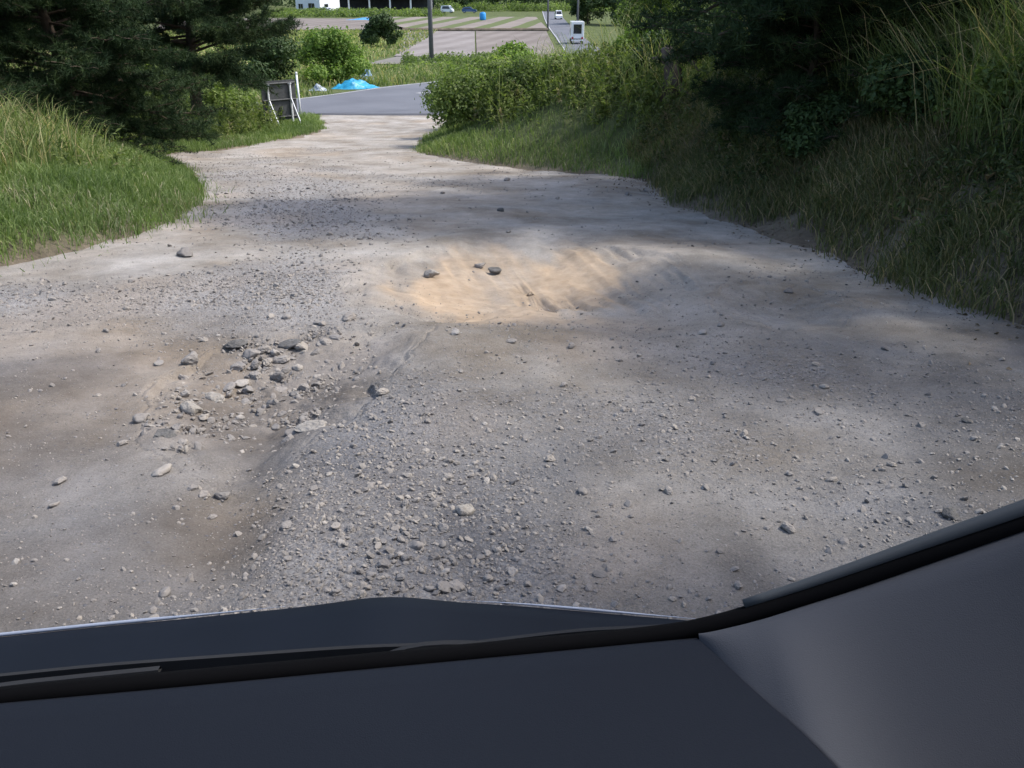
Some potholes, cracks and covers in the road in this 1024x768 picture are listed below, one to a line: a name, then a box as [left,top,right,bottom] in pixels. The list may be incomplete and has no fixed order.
pothole [345,234,701,323]
pothole [133,323,436,499]
